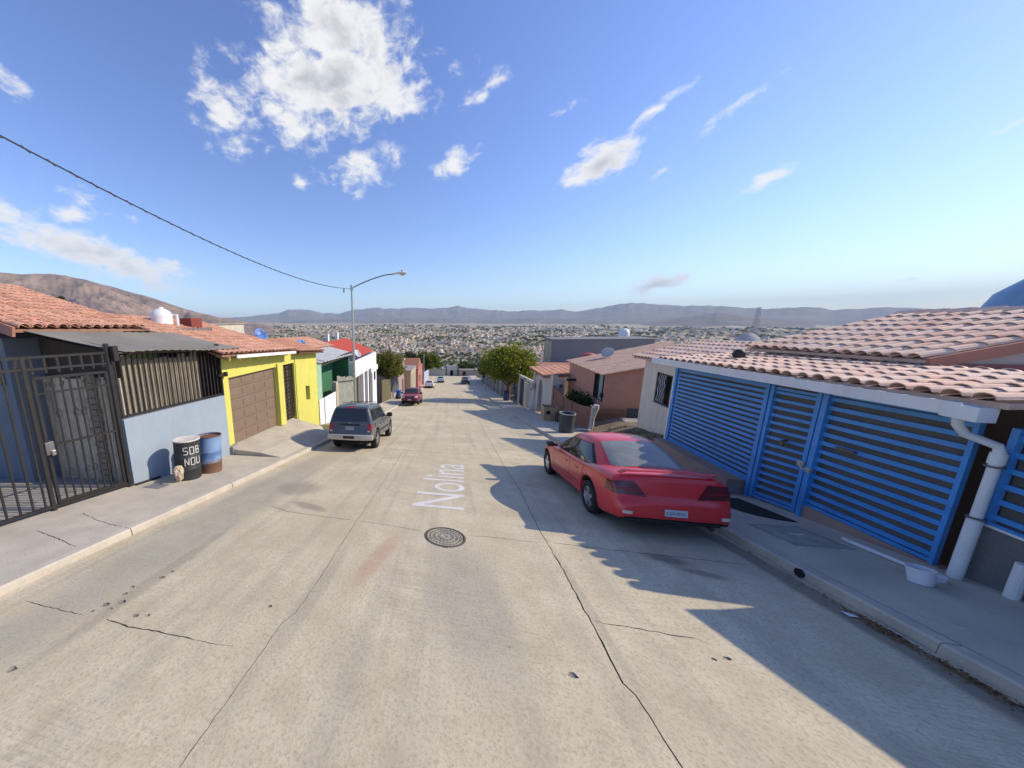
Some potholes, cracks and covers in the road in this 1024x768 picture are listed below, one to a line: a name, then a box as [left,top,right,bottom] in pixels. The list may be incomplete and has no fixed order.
crack [107,619,229,646]
manhole cover [424,527,466,548]
